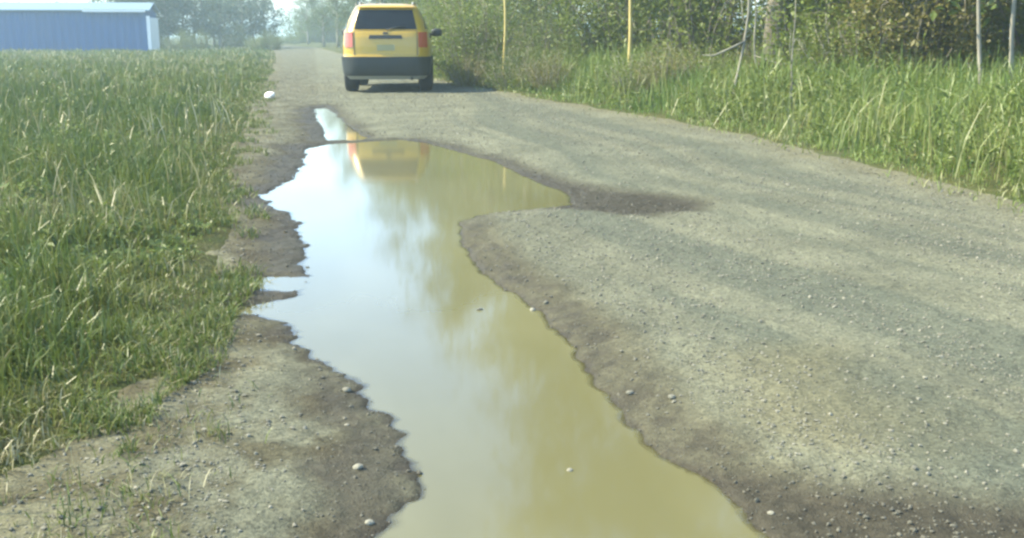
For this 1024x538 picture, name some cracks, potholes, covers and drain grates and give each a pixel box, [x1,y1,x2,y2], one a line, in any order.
pothole [210,137,801,538]
pothole [312,107,370,140]
